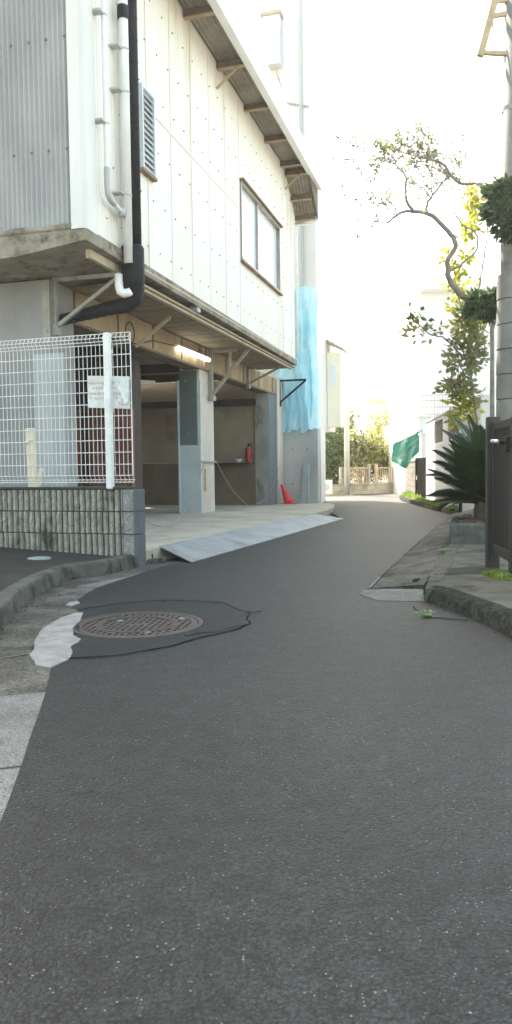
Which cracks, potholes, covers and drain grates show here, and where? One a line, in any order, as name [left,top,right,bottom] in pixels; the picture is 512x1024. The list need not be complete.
manhole cover [73,611,203,638]
